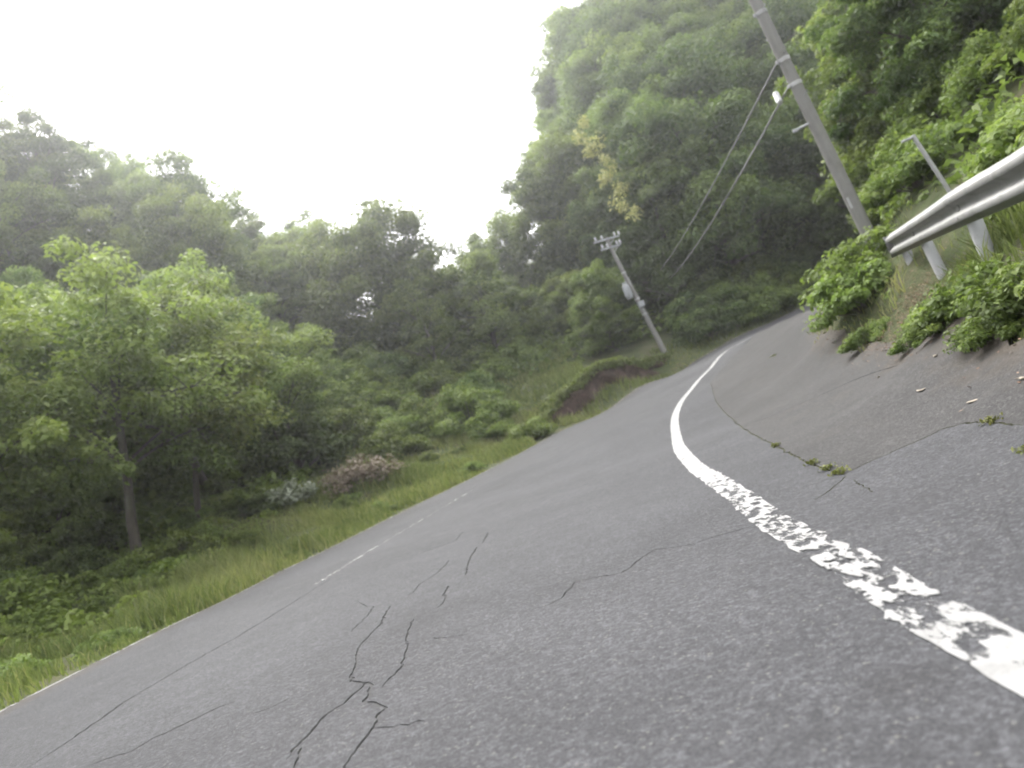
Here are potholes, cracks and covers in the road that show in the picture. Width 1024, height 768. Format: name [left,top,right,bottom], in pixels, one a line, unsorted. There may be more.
crack [90,601,425,768]
crack [520,526,757,614]
crack [409,533,488,607]
